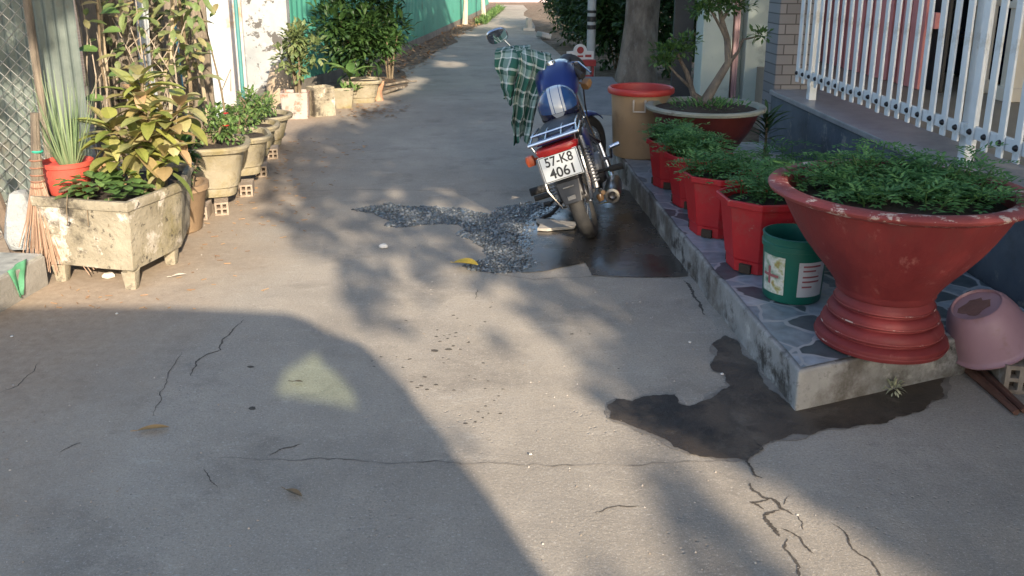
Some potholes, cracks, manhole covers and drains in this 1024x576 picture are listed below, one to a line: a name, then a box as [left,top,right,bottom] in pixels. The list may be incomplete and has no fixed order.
crack [153,320,243,415]
crack [745,439,814,576]
crack [836,525,881,576]
